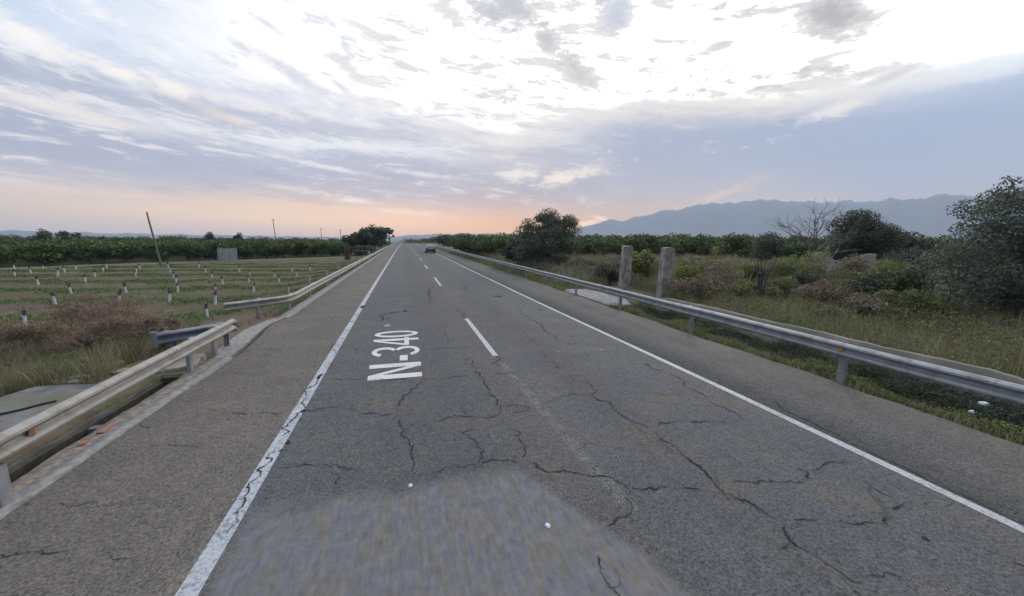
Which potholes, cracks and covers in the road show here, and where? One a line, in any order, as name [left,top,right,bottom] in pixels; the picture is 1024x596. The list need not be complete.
crack [833,482,929,525]
crack [191,317,903,596]
crack [0,550,70,567]
